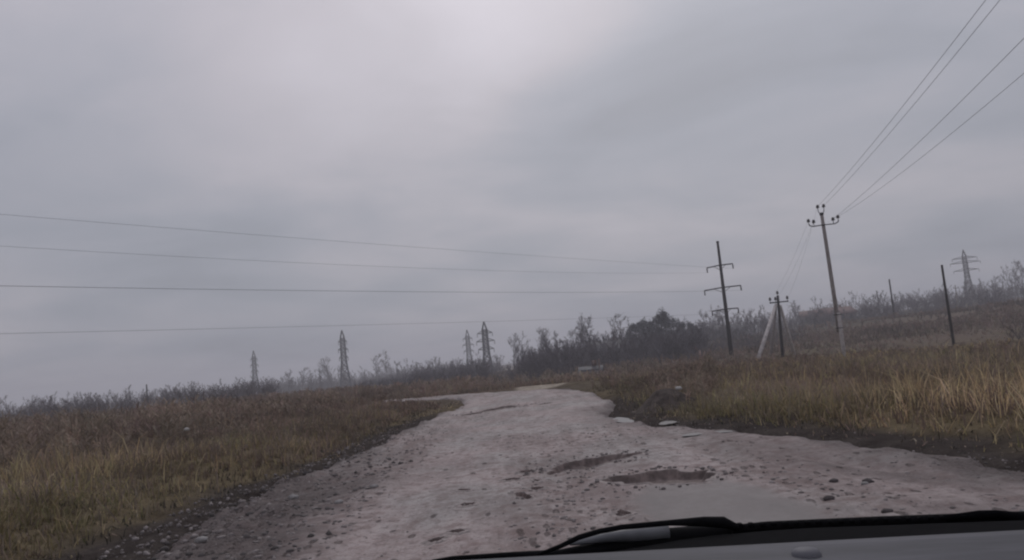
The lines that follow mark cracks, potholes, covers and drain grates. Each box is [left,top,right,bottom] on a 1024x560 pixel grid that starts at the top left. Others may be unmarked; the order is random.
pothole [593,468,723,486]
pothole [458,405,522,416]
pothole [539,451,650,476]
